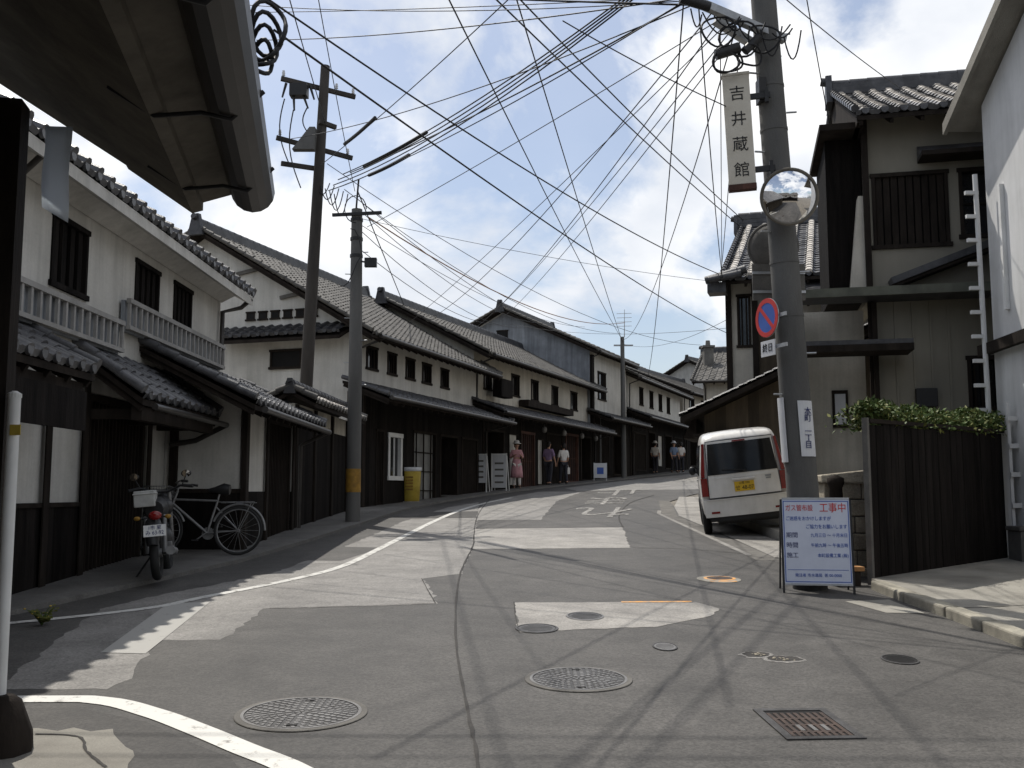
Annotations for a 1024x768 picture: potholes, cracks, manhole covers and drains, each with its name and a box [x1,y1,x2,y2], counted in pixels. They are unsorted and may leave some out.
manhole cover [233,696,368,732]
manhole cover [525,666,633,692]
manhole cover [566,612,604,620]
utility cover [880,654,920,664]
crack [35,733,107,767]
manhole cover [515,623,559,633]
utility cover [652,642,678,651]
drain grate [753,708,867,740]
